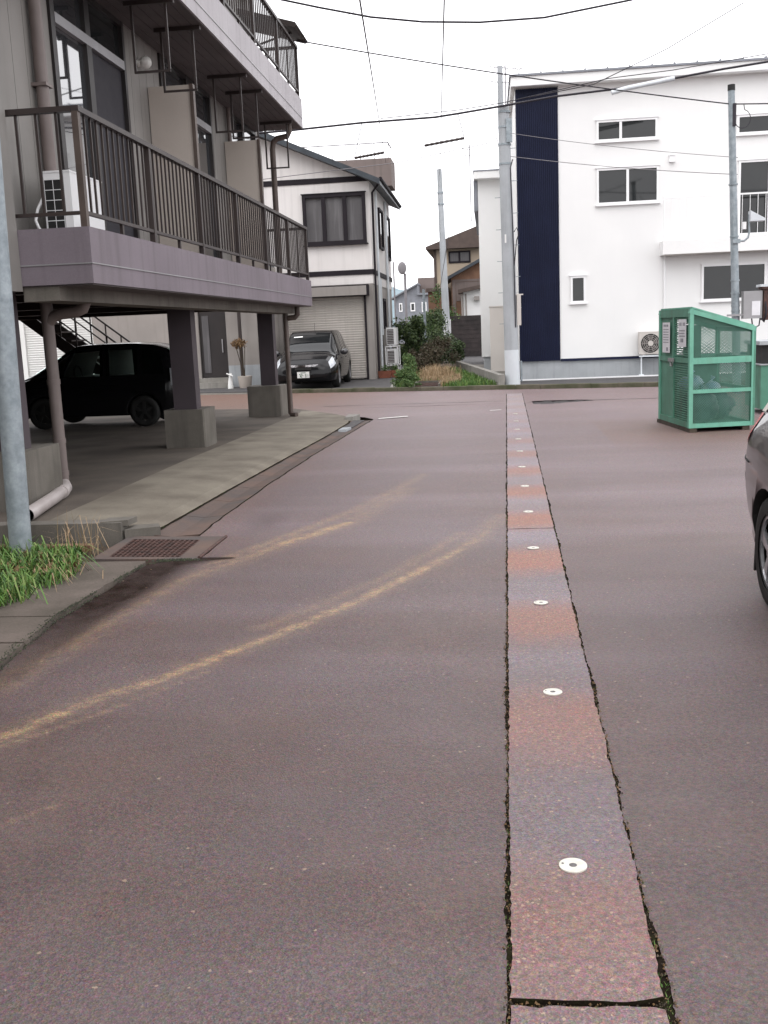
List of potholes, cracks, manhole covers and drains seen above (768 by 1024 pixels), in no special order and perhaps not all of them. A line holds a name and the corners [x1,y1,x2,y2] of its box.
drain grate [91,535,228,566]
crack [509,1001,670,1009]
